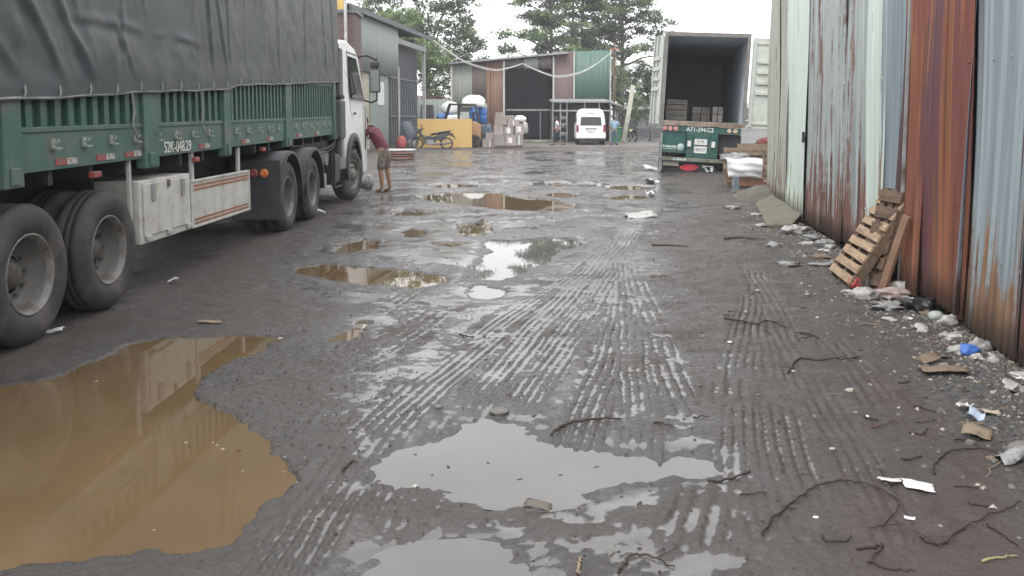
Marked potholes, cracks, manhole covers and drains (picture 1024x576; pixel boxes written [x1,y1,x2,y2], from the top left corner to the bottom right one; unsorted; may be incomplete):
pothole [456,235,593,283]
pothole [284,261,459,291]
pothole [411,189,580,212]
pothole [0,330,321,575]
pothole [351,411,741,518]
